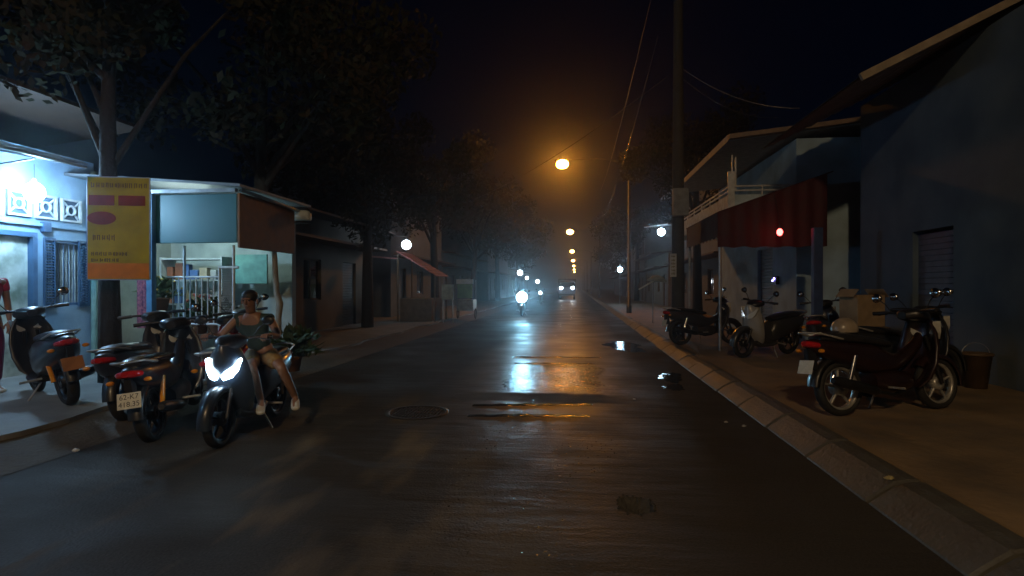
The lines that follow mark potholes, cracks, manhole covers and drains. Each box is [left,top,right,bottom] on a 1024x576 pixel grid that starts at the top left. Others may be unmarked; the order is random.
manhole cover [385,405,449,420]
pothole [616,494,656,516]
